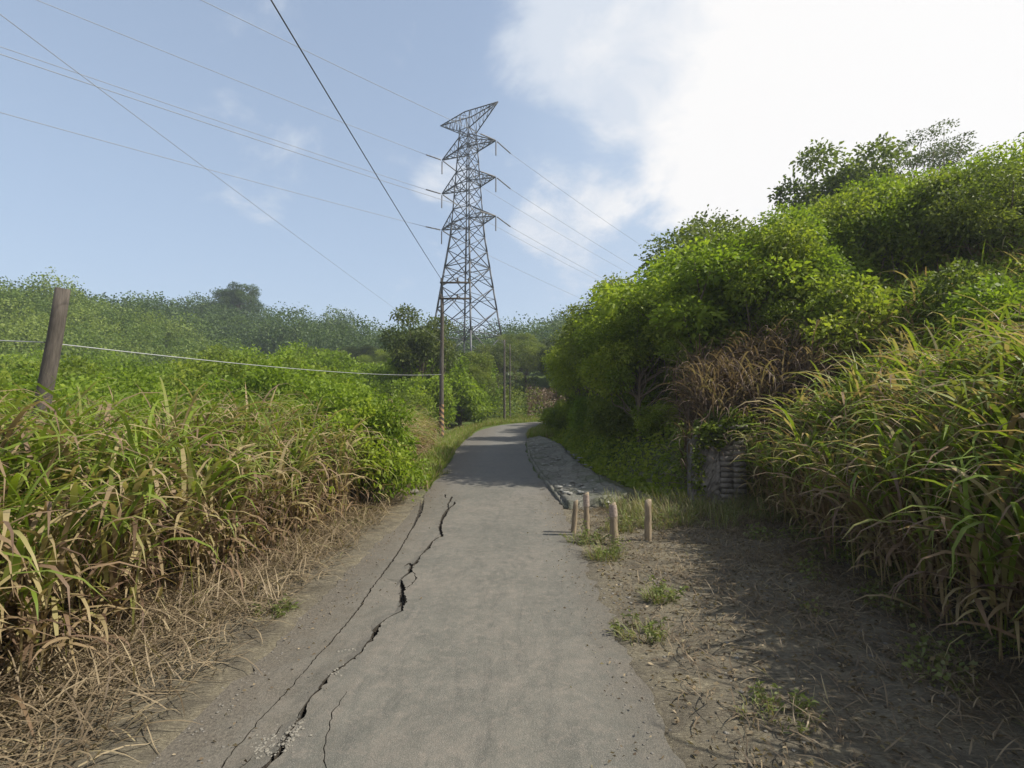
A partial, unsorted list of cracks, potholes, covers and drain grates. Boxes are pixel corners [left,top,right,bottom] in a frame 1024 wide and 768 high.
crack [221,494,456,768]
